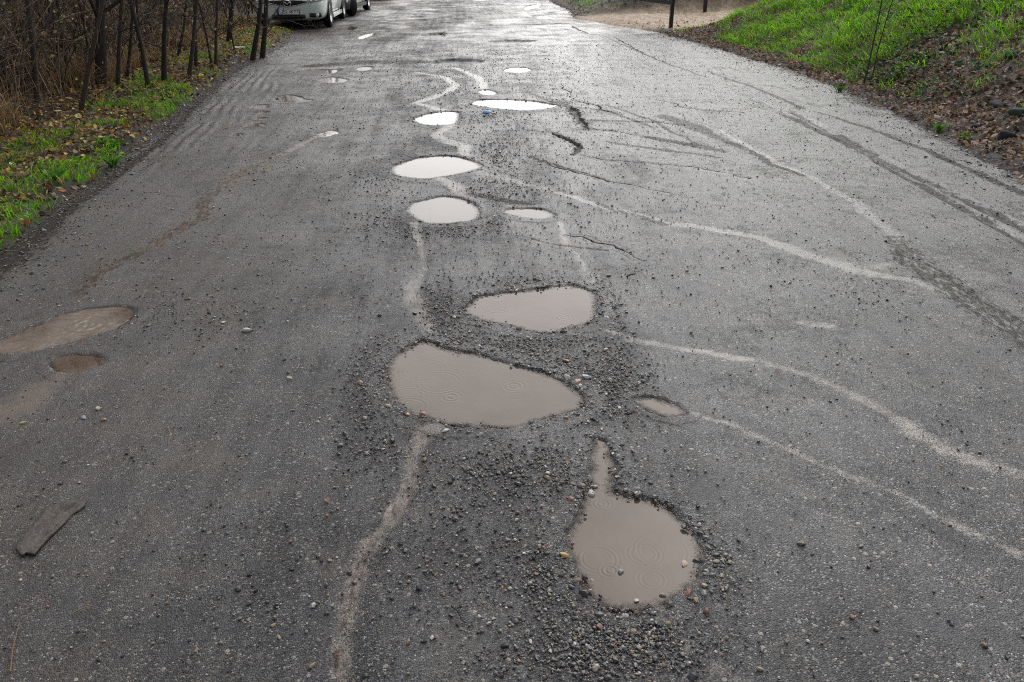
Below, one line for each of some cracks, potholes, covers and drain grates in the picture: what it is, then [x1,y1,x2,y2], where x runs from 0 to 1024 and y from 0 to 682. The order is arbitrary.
pothole [0,298,154,363]
pothole [540,426,731,629]
pothole [362,333,608,444]
pothole [34,345,126,382]
crack [563,234,647,262]
pothole [495,204,569,223]
pothole [458,97,572,113]
crack [541,86,750,194]
pothole [372,152,498,183]
pothole [400,109,472,128]
pothole [618,390,703,426]
pothole [446,277,618,341]
